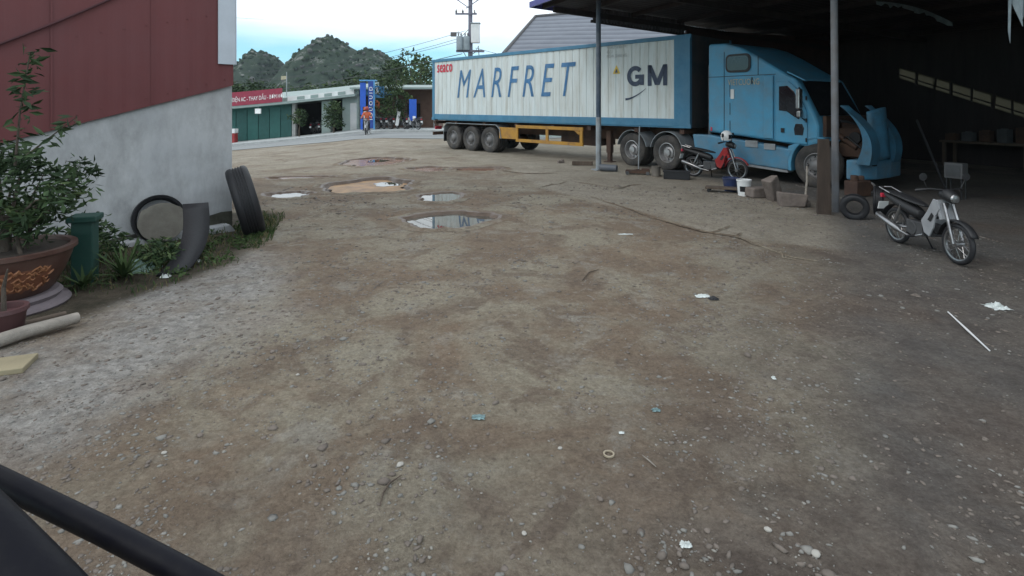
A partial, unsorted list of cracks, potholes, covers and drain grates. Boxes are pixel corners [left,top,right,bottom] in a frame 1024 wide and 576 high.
pothole [311,176,421,195]
pothole [407,191,474,204]
pothole [333,157,418,168]
pothole [387,208,513,232]
pothole [398,165,459,173]
pothole [257,190,322,200]
